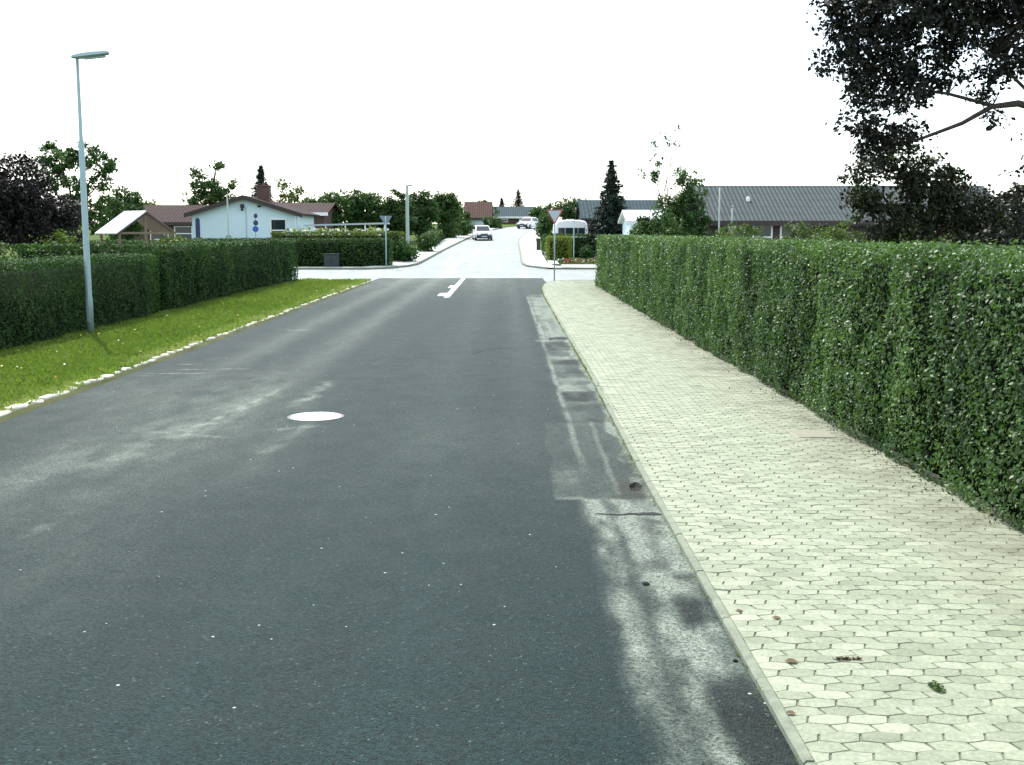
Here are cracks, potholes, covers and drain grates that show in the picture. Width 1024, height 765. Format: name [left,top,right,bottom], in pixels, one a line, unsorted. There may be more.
manhole cover [287,412,344,422]
